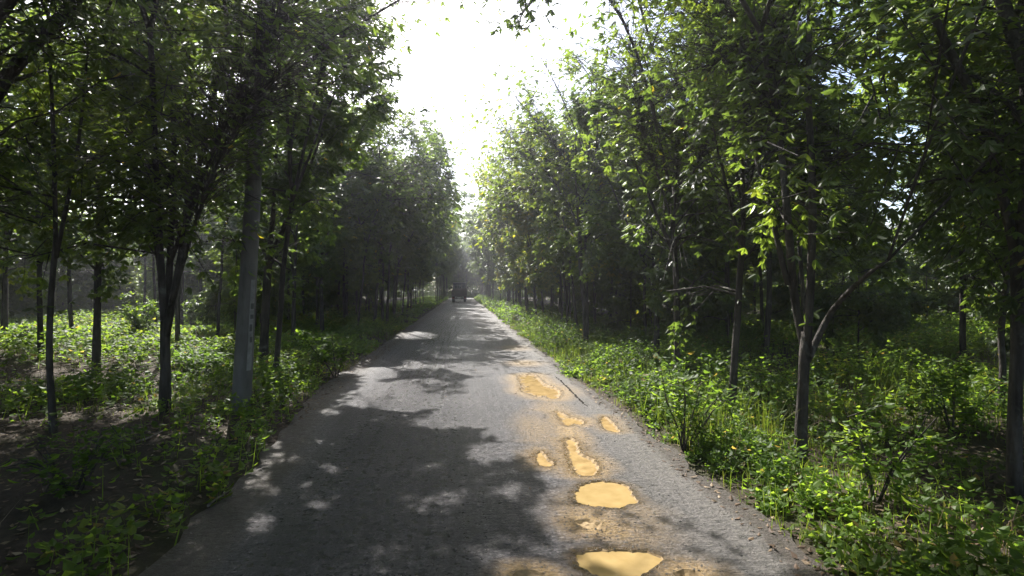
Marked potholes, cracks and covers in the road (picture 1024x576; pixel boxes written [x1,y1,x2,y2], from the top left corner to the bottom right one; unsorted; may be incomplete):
pothole [534,451,554,467]
crack [556,377,587,406]
pothole [599,416,620,432]
pothole [574,519,606,531]
pothole [554,411,584,426]
pothole [564,437,599,476]
pothole [573,480,638,508]
pothole [518,374,562,399]
pothole [575,549,664,576]
